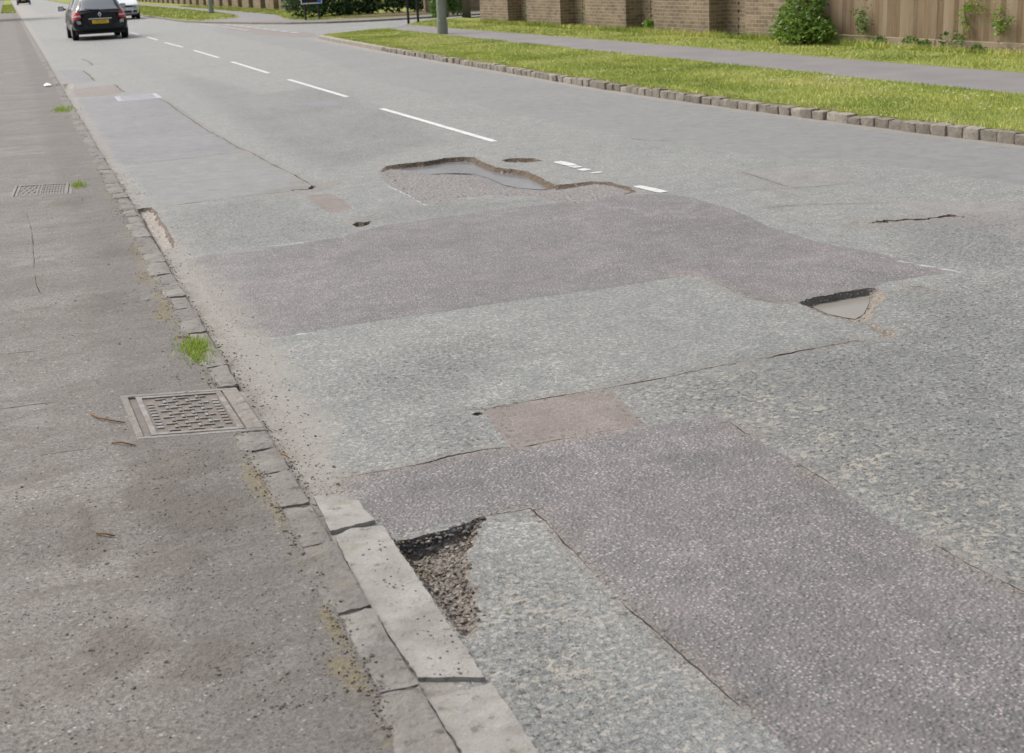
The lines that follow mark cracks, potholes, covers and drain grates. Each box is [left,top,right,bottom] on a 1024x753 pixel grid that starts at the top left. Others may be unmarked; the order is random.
pothole [796,288,886,323]
pothole [137,207,175,252]
pothole [379,157,636,204]
crack [745,173,964,224]
manhole cover [120,387,266,440]
pothole [391,516,486,639]
